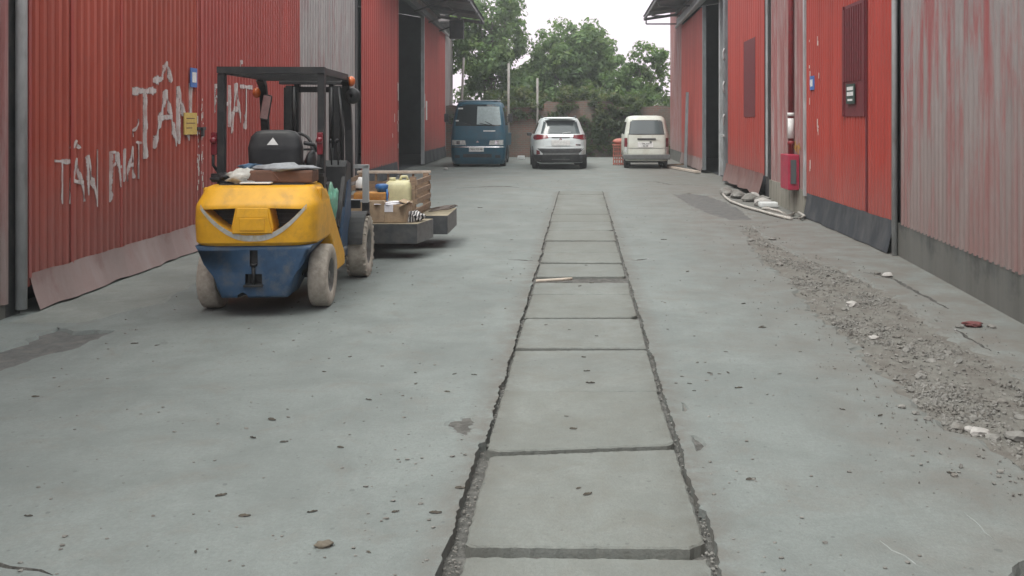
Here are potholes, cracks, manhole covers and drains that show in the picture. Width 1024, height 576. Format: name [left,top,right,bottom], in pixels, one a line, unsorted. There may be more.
crack [956,330,991,351]
crack [0,562,53,575]
crack [865,272,949,309]
